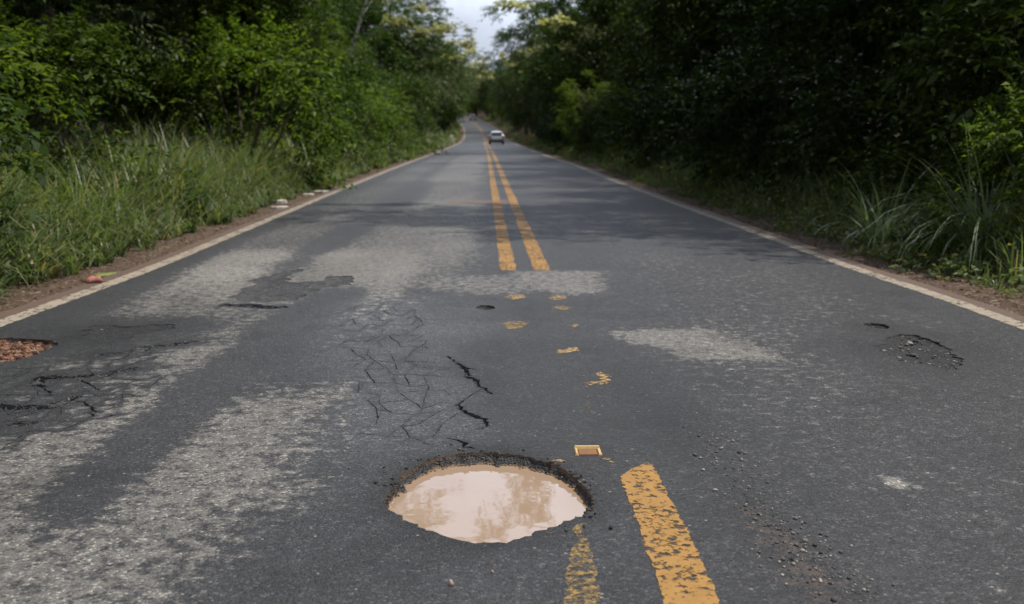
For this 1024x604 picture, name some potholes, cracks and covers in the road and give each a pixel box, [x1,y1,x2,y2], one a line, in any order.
pothole [348,439,613,547]
crack [339,303,493,453]
crack [0,341,197,453]
pothole [874,334,964,371]
pothole [0,338,58,362]
